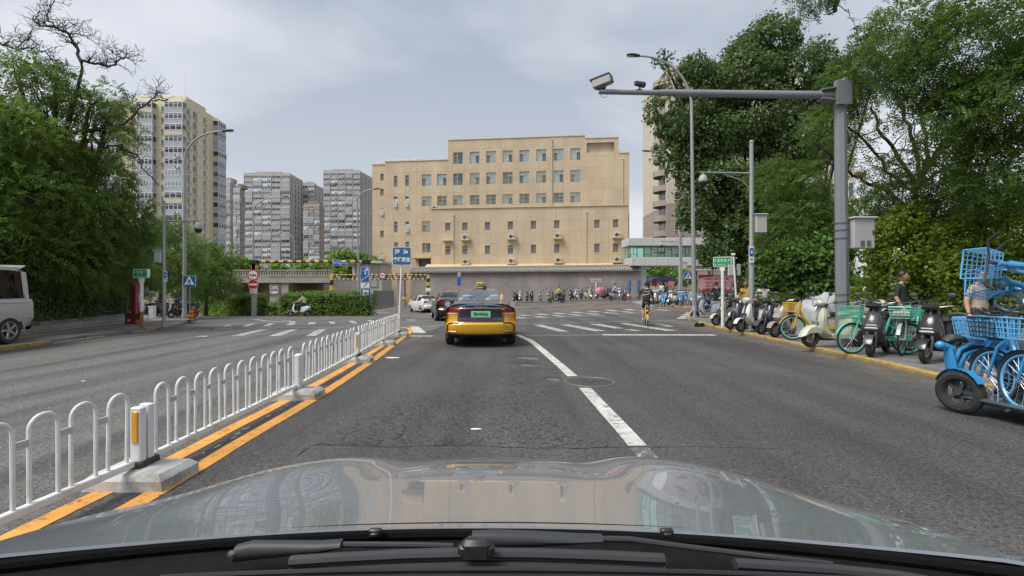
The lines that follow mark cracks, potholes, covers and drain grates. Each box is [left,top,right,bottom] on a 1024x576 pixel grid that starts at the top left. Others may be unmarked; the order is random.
manhole cover [563,377,616,387]
